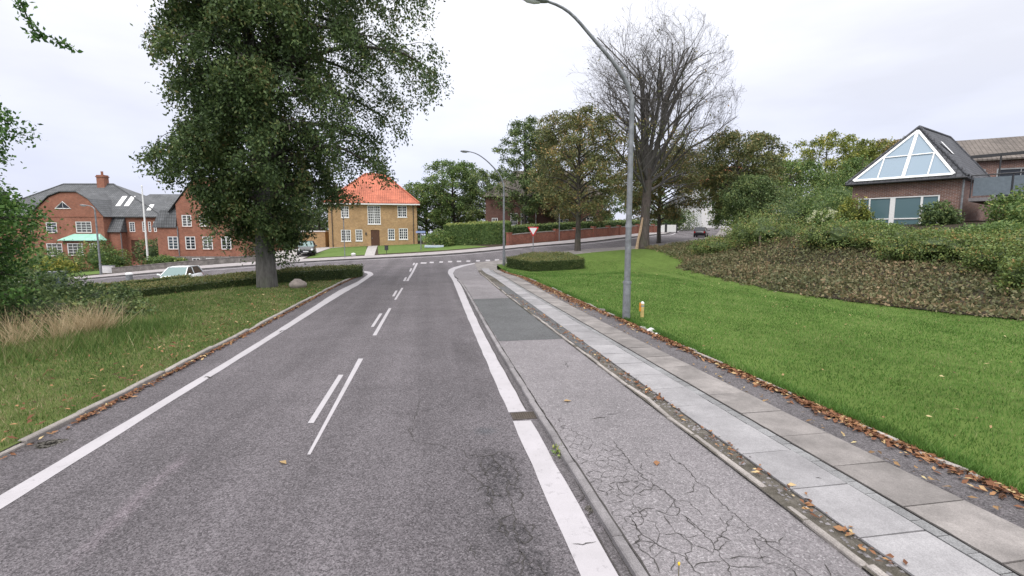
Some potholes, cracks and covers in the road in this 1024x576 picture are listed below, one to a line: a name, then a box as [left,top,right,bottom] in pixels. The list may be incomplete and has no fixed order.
crack [552,416,831,576]
crack [463,450,546,575]
drain grate [510,411,537,420]
